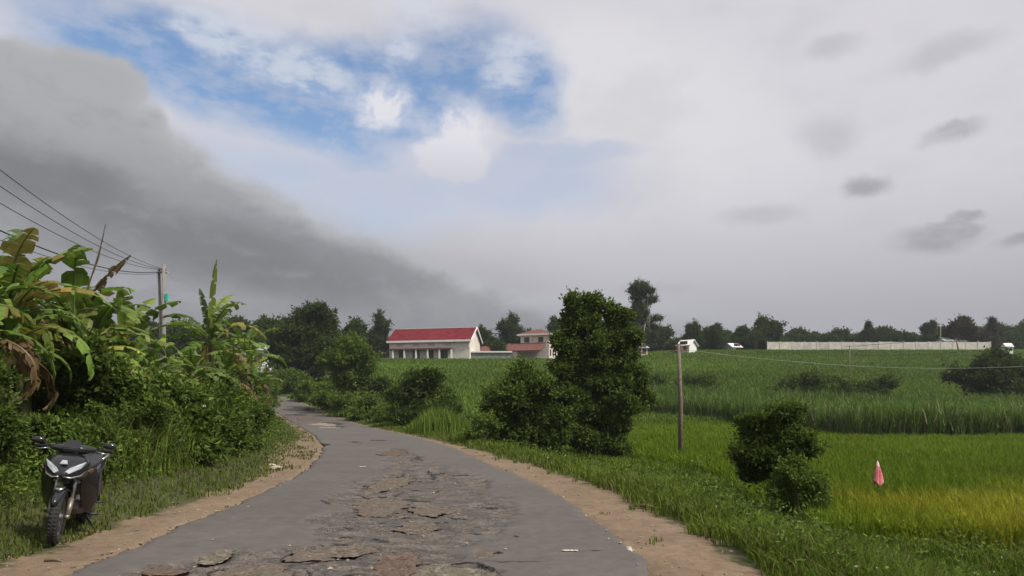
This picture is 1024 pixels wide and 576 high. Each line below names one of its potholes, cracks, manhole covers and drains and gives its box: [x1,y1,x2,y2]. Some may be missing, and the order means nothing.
pothole [373,553,422,576]
pothole [352,498,412,517]
pothole [408,504,457,517]
crack [279,456,527,576]
